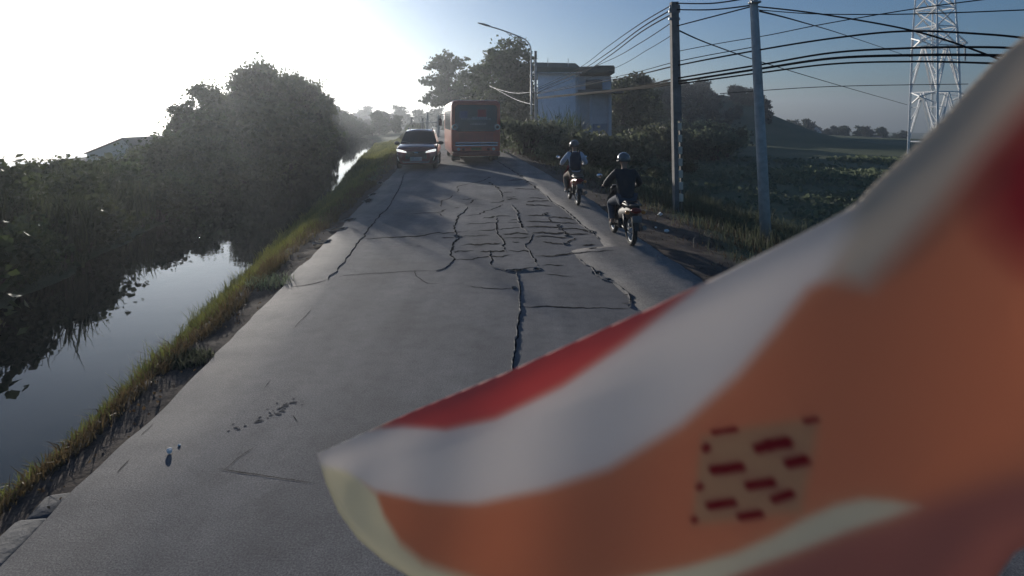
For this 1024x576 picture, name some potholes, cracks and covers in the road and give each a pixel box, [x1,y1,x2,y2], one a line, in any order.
crack [522,294,630,309]
crack [219,446,311,483]
crack [343,161,613,289]
